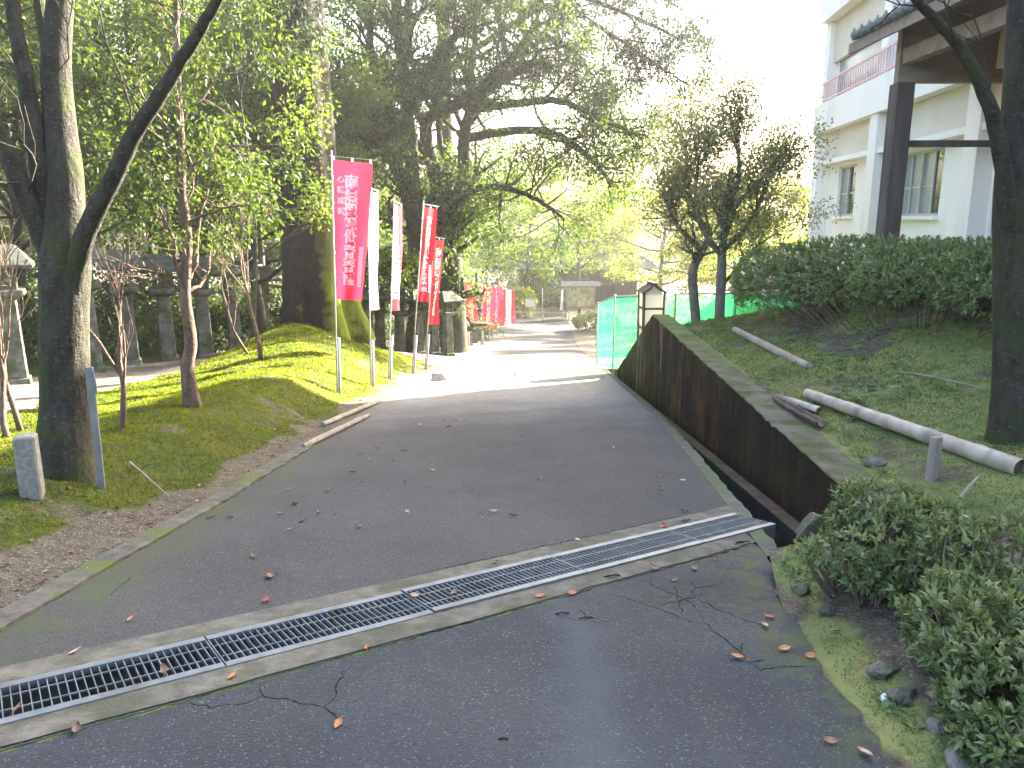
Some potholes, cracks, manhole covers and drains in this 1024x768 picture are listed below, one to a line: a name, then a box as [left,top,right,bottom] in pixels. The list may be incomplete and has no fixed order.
drain grate [0,636,225,726]
crack [187,667,349,729]
drain grate [665,513,776,543]
crack [608,580,804,671]
drain grate [549,529,705,573]
drain grate [205,591,434,667]
drain grate [401,555,587,613]
